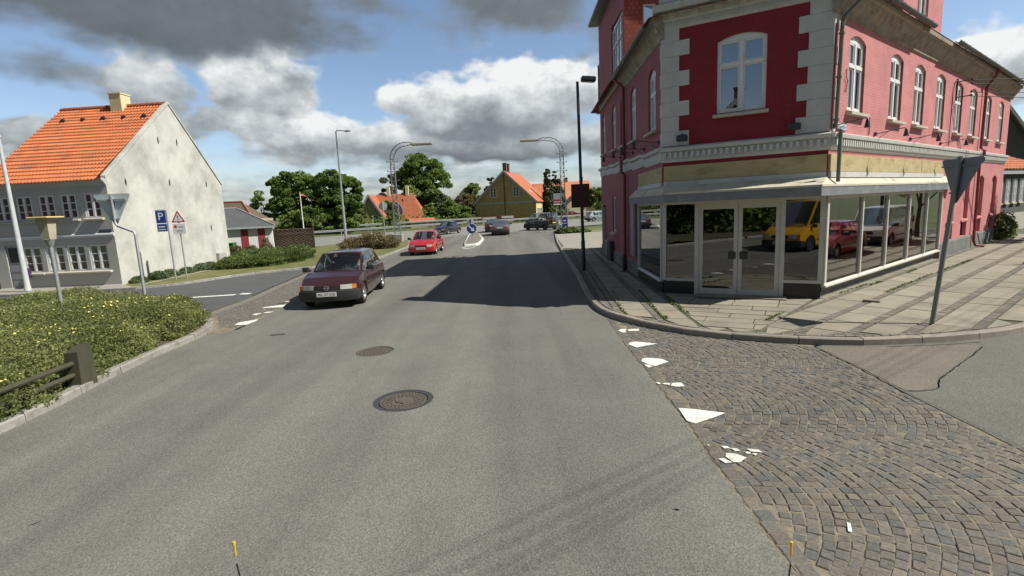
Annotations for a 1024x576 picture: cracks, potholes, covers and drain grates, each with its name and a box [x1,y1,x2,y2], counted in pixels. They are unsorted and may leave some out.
manhole cover [373,390,433,412]
manhole cover [356,346,394,356]
